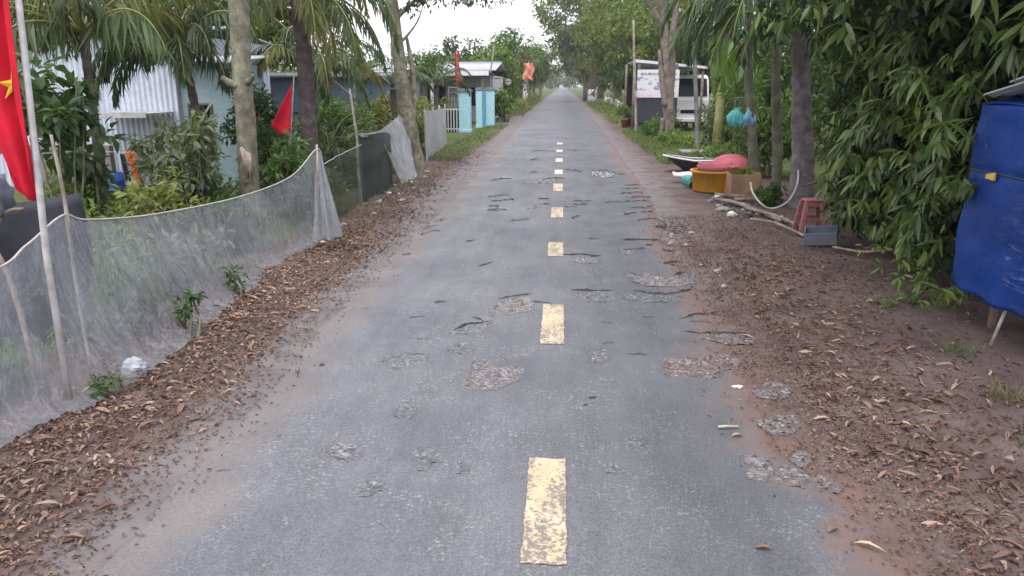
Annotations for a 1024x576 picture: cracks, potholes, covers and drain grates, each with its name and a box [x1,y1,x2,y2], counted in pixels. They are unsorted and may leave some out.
pothole [391,400,417,420]
pothole [658,353,741,380]
crack [499,293,550,303]
pothole [627,272,697,287]
pothole [752,414,802,436]
pothole [484,295,536,317]
pothole [450,318,498,335]
crack [409,300,492,330]
pothole [787,450,814,469]
pothole [352,480,391,497]
crack [682,311,747,334]
